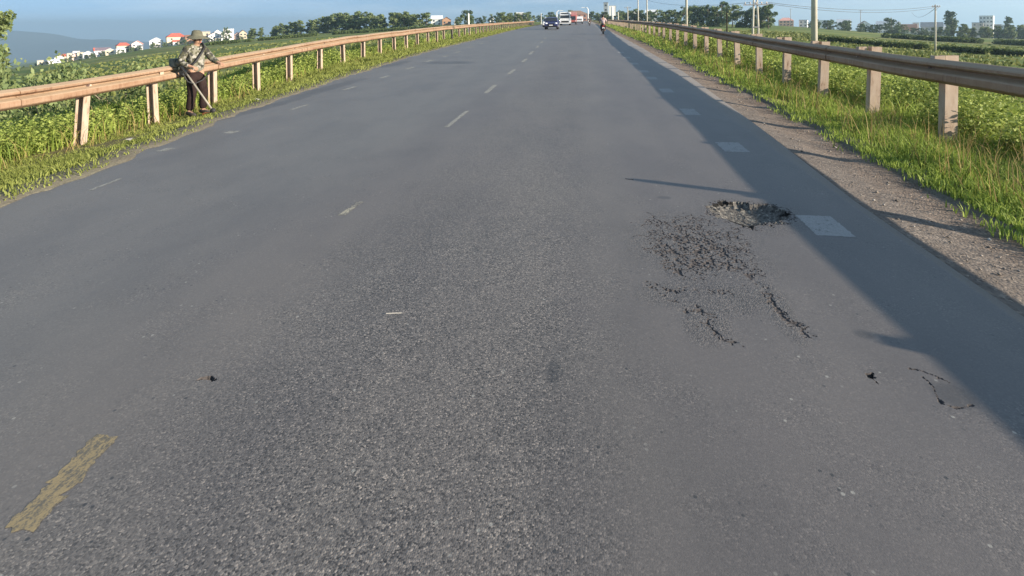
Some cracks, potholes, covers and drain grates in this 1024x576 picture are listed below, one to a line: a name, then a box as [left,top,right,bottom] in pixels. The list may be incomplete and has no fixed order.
crack [630,198,817,347]
pothole [706,200,792,230]
crack [908,367,975,410]
